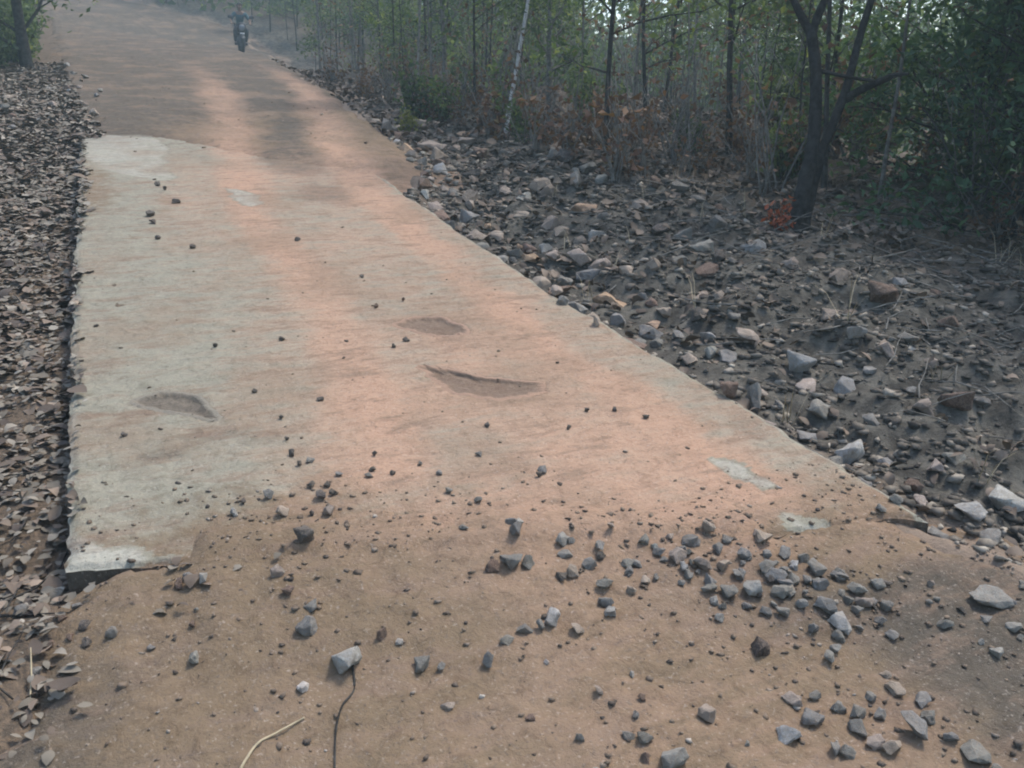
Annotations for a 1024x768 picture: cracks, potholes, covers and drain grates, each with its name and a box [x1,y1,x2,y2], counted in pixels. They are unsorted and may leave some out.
pothole [415,364,548,401]
pothole [129,390,223,422]
pothole [392,316,471,338]
